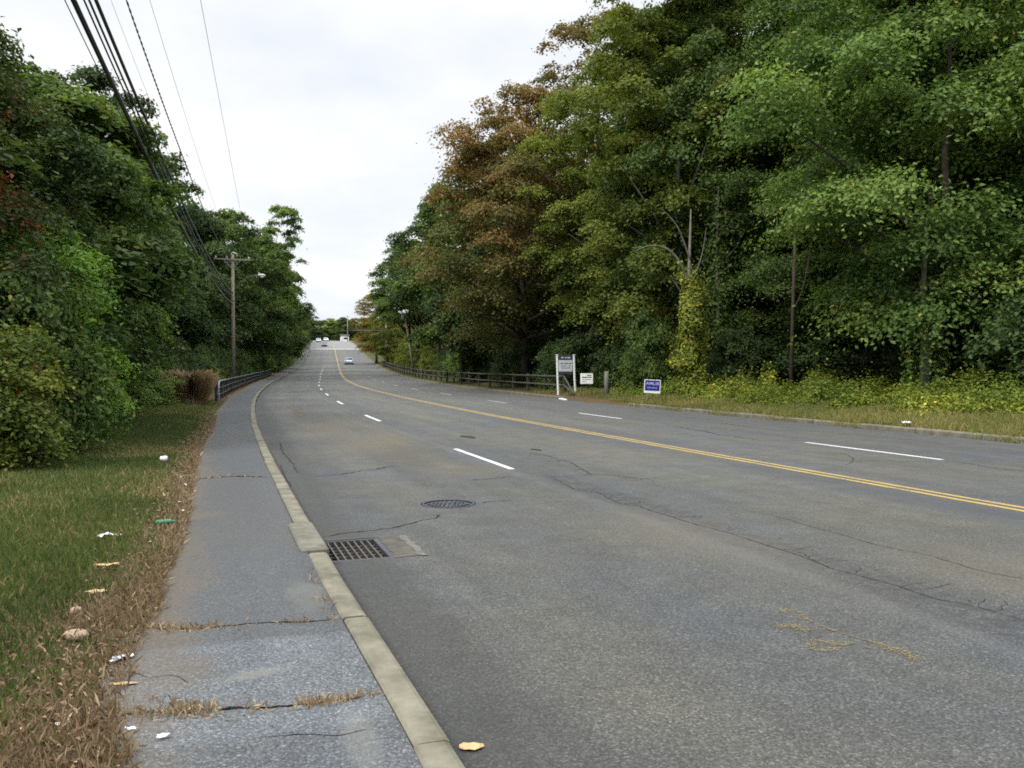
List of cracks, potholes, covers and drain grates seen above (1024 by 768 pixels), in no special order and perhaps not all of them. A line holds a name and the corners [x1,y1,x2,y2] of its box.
crack [322,513,441,537]
crack [530,453,659,482]
crack [546,475,1024,621]
manhole cover [417,499,480,509]
crack [279,442,416,487]
